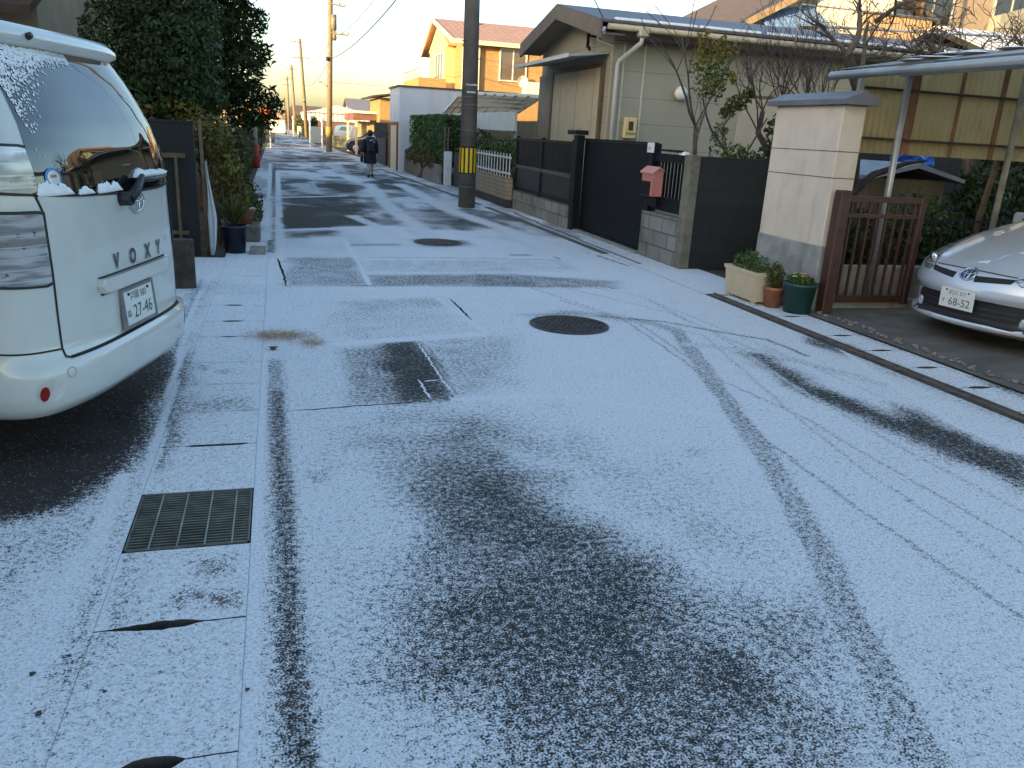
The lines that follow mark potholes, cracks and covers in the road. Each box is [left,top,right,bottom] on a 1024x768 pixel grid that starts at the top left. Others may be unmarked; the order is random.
drain grate [123,488,253,554]
manhole cover [529,315,609,335]
crack [277,258,287,286]
manhole cover [413,238,462,246]
